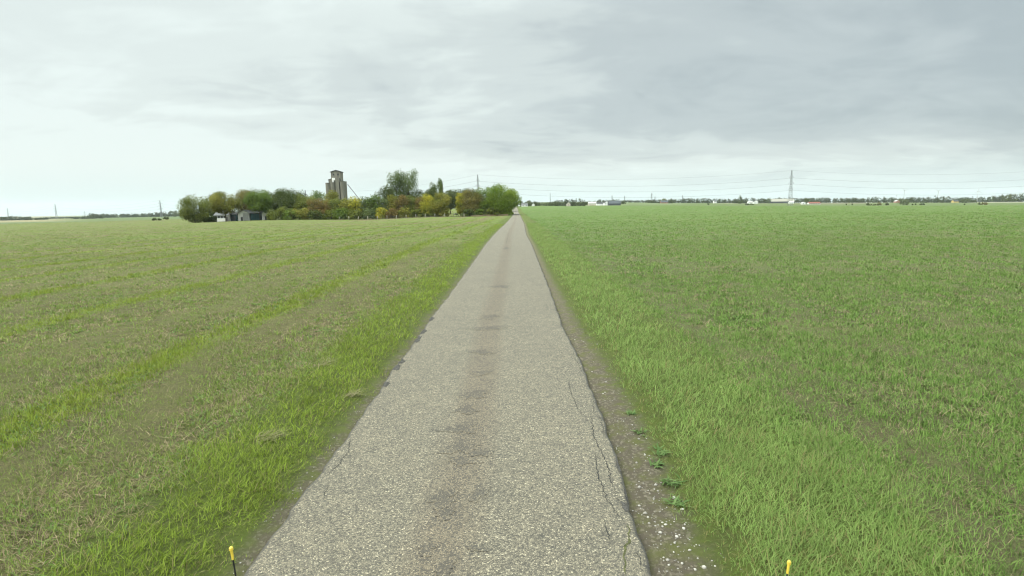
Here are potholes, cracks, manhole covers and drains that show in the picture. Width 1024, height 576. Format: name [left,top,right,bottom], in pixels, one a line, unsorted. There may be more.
crack [562,354,642,574]
